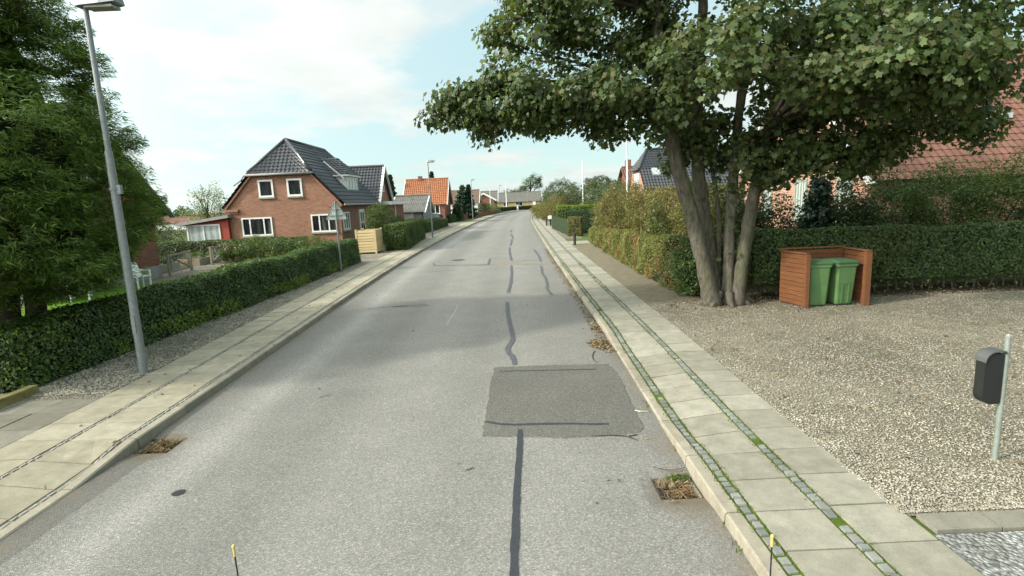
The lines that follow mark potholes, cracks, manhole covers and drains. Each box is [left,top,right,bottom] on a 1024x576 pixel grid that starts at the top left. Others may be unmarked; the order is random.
drain grate [650,477,703,500]
drain grate [135,438,186,454]
